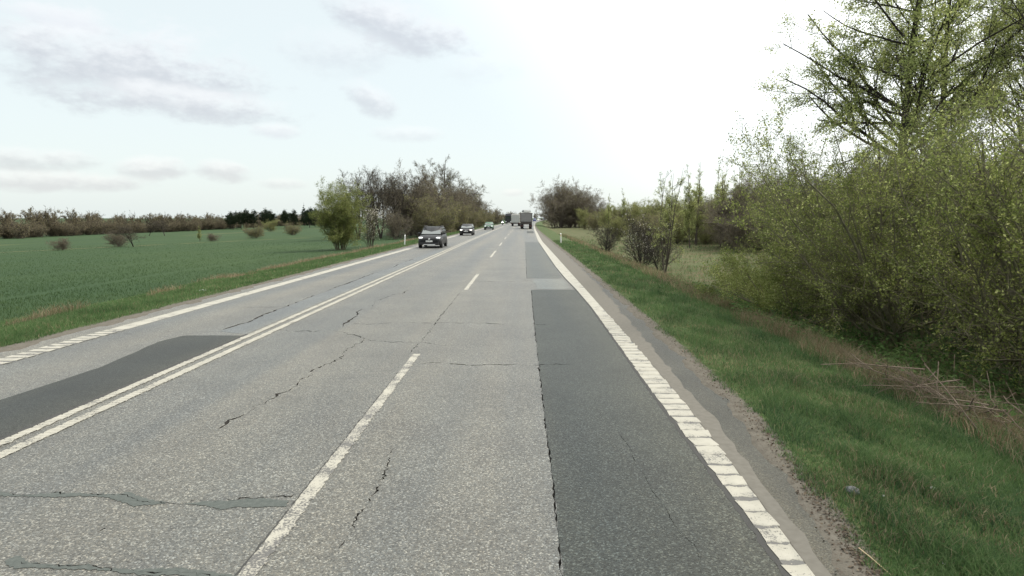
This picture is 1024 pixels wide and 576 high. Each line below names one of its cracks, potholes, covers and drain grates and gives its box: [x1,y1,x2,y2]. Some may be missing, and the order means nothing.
crack [217,260,410,332]
crack [339,447,395,548]
crack [218,290,492,429]
